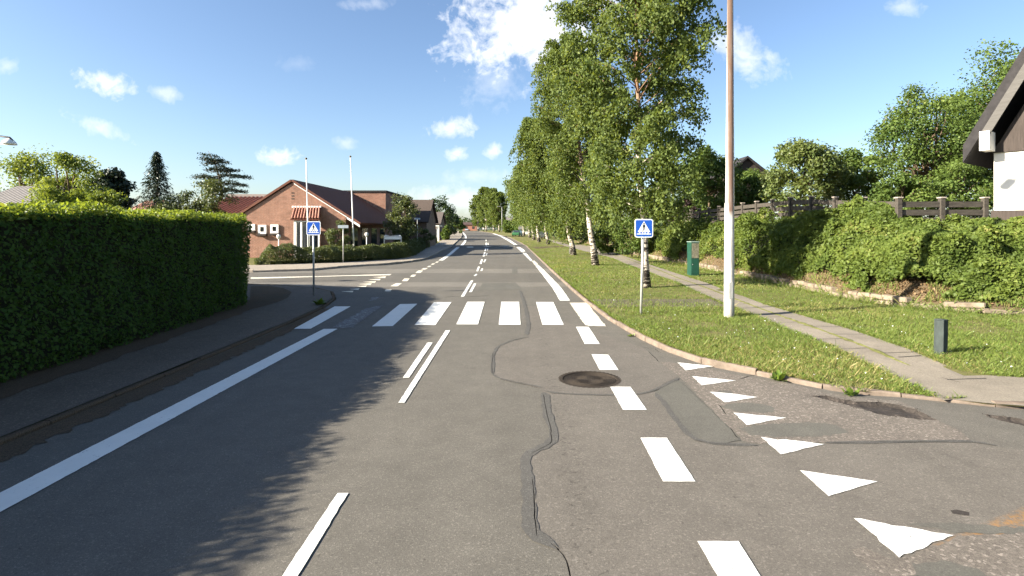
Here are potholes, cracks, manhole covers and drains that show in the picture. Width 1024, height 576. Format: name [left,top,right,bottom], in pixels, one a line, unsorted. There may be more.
manhole cover [558,371,621,388]
pothole [982,413,1024,426]
pothole [807,395,936,420]
